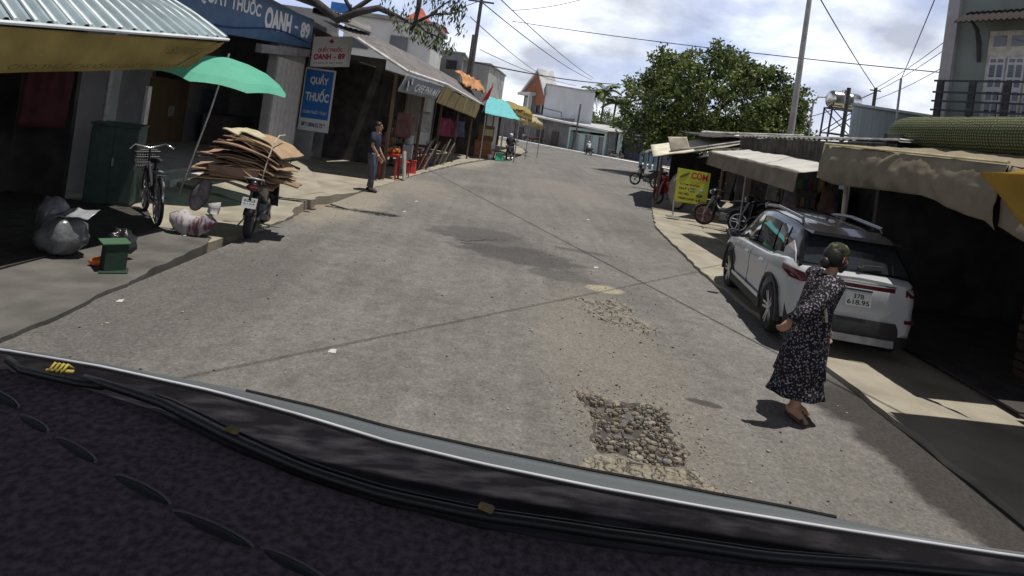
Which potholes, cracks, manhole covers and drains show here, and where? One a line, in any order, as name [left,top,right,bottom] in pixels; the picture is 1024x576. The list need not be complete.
pothole [573,390,691,468]
pothole [575,298,661,334]
